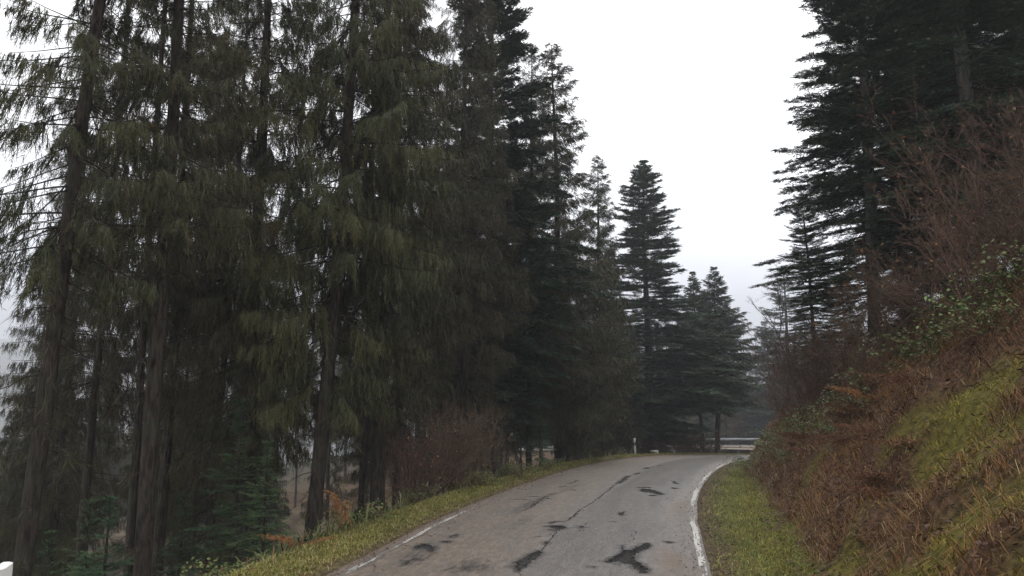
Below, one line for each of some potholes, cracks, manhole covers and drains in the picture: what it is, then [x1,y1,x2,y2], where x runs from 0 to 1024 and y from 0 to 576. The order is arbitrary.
crack [513,465,660,576]
